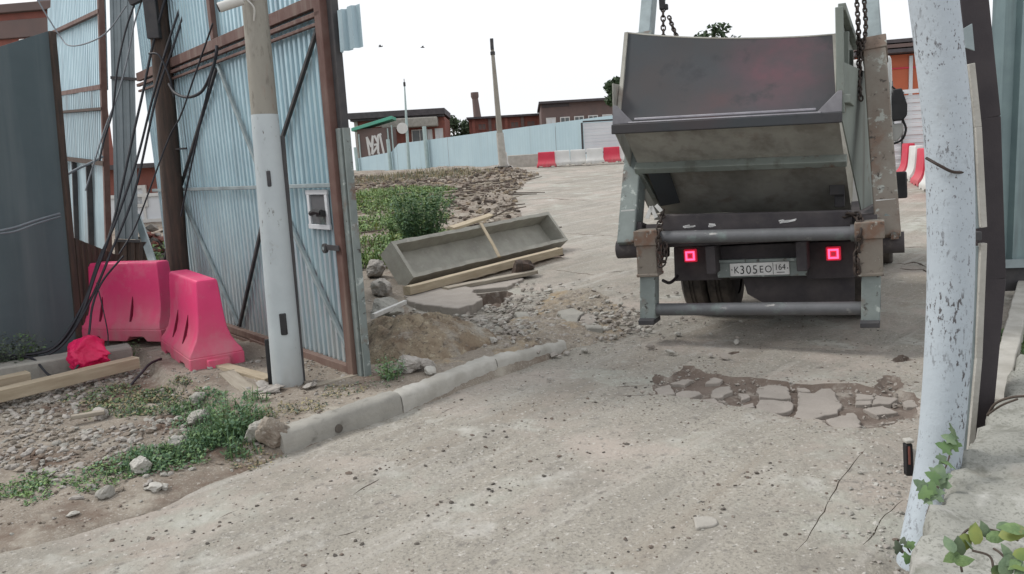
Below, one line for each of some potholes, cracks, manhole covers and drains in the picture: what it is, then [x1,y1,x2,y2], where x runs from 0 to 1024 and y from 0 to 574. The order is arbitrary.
crack [795,451,864,552]
crack [864,500,903,544]
pothole [652,365,921,428]
